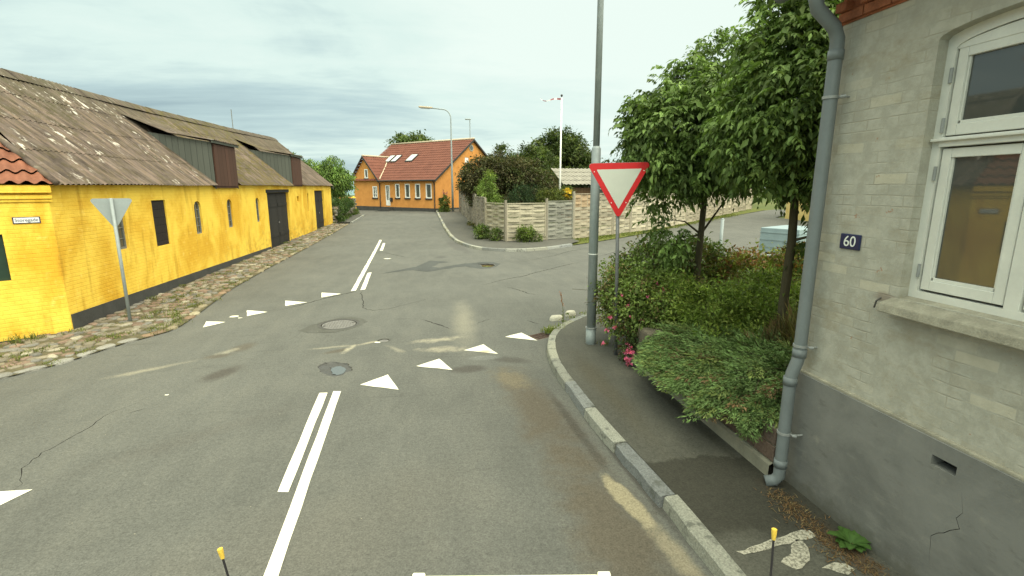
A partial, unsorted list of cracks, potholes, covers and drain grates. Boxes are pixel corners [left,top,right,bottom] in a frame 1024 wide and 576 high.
pothole [318,362,353,376]
manhole cover [318,319,360,330]
crack [14,409,142,490]
crack [492,249,581,295]
